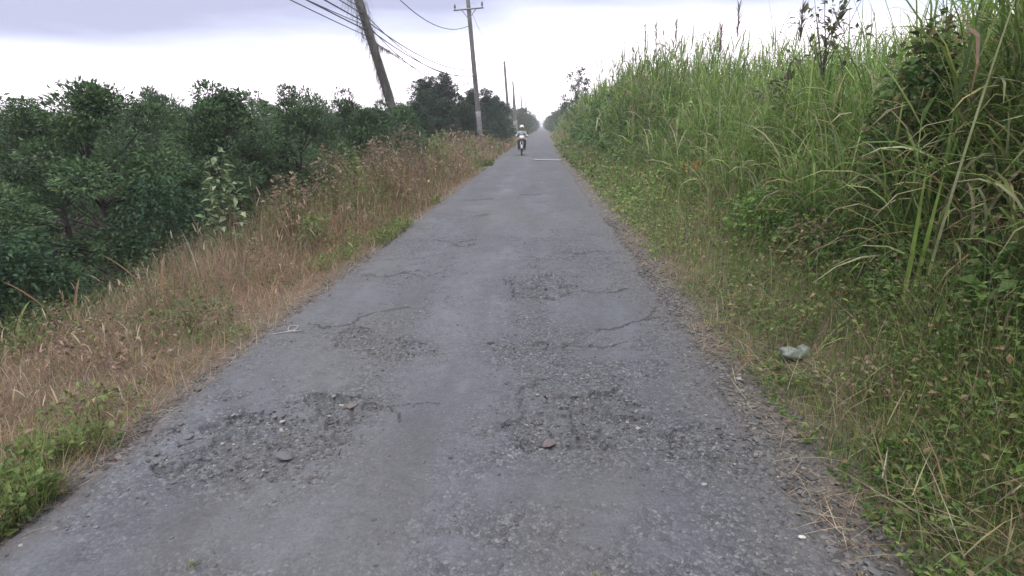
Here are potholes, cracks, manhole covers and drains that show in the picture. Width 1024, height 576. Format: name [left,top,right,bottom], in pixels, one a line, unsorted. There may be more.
pothole [502,274,580,304]
crack [308,306,410,329]
crack [561,306,672,349]
pothole [333,326,438,361]
pothole [500,383,659,454]
crack [361,269,434,278]
pothole [138,391,384,488]
